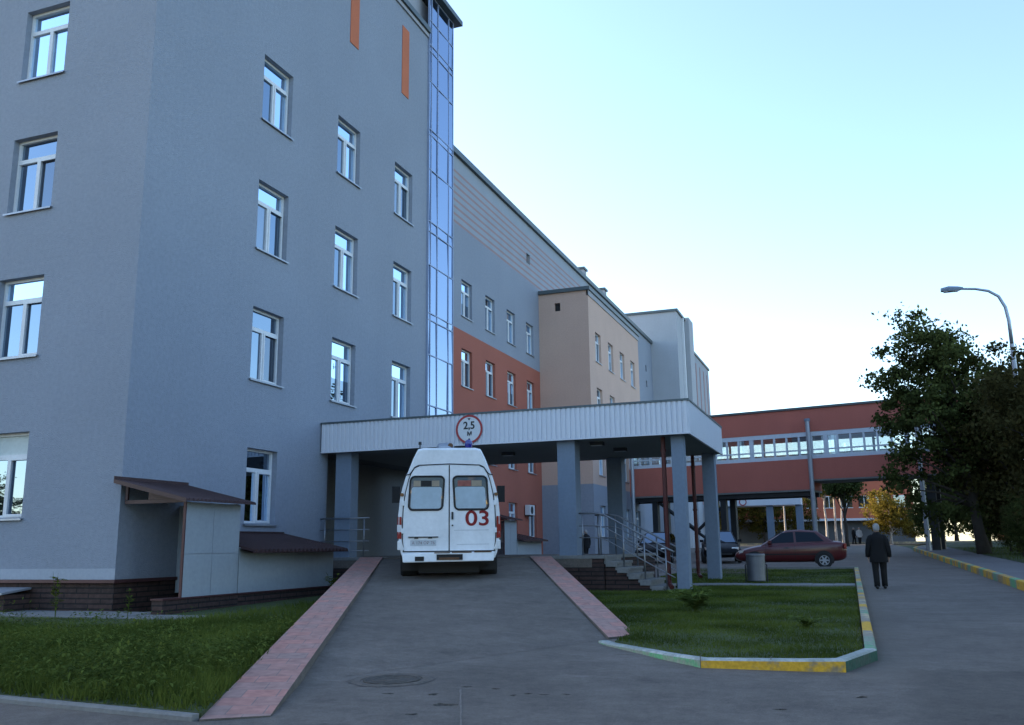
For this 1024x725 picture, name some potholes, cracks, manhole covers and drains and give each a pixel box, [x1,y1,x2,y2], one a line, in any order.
manhole cover [347,673,436,687]
